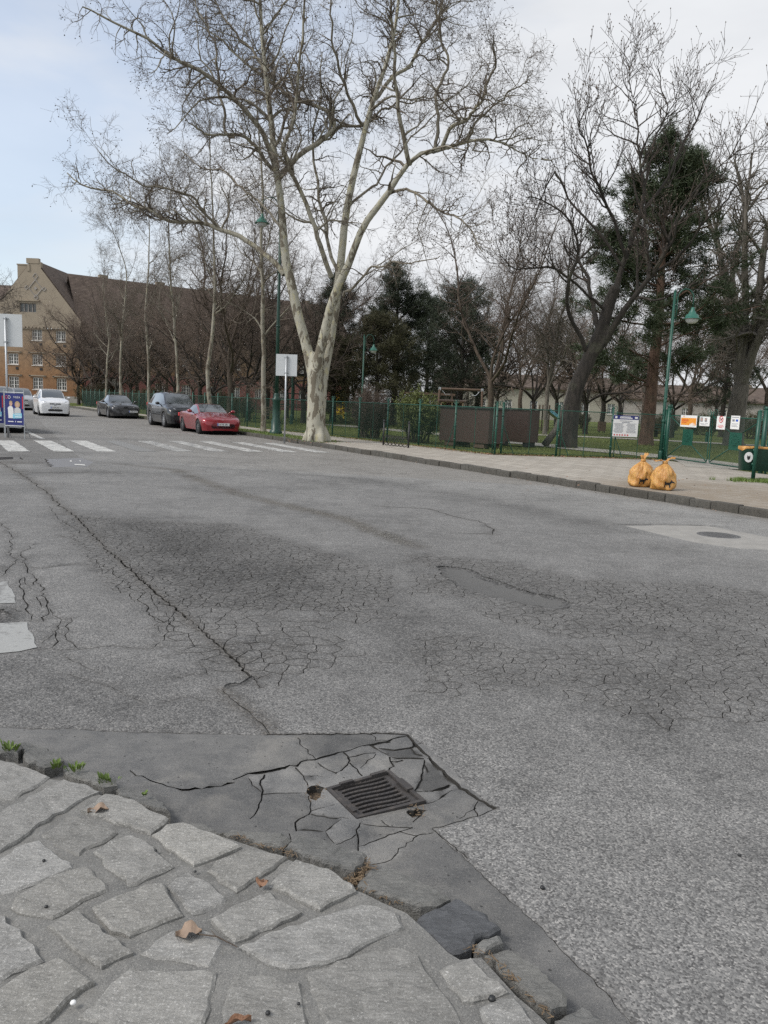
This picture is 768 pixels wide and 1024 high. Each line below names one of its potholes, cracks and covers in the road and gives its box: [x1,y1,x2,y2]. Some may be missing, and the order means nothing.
pothole [436,566,573,610]
crack [0,507,397,701]
drain grate [326,769,426,839]
crack [398,555,768,666]
crack [130,733,497,865]
crack [387,631,768,731]
